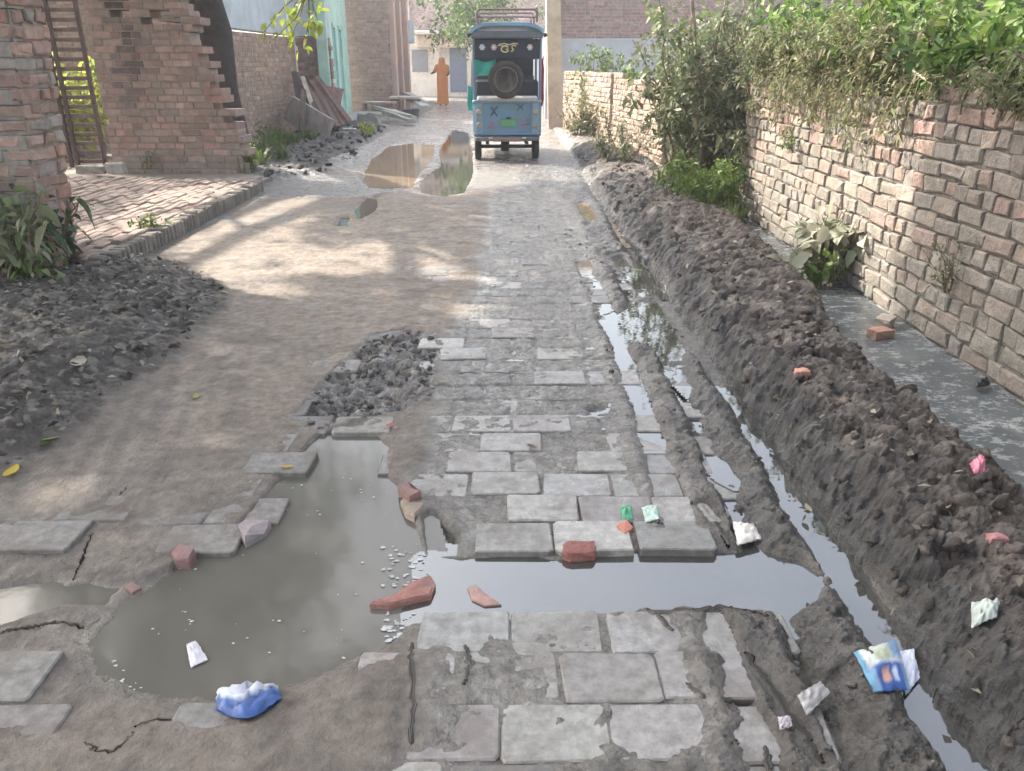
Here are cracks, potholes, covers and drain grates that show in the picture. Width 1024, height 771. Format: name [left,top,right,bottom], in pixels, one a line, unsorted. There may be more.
pothole [359,141,438,189]
pothole [69,423,448,719]
pothole [418,132,474,196]
pothole [417,504,466,560]
crack [84,717,183,755]
pothole [400,541,850,640]
crack [0,618,100,636]
pothole [291,327,441,434]
crack [72,533,94,579]
